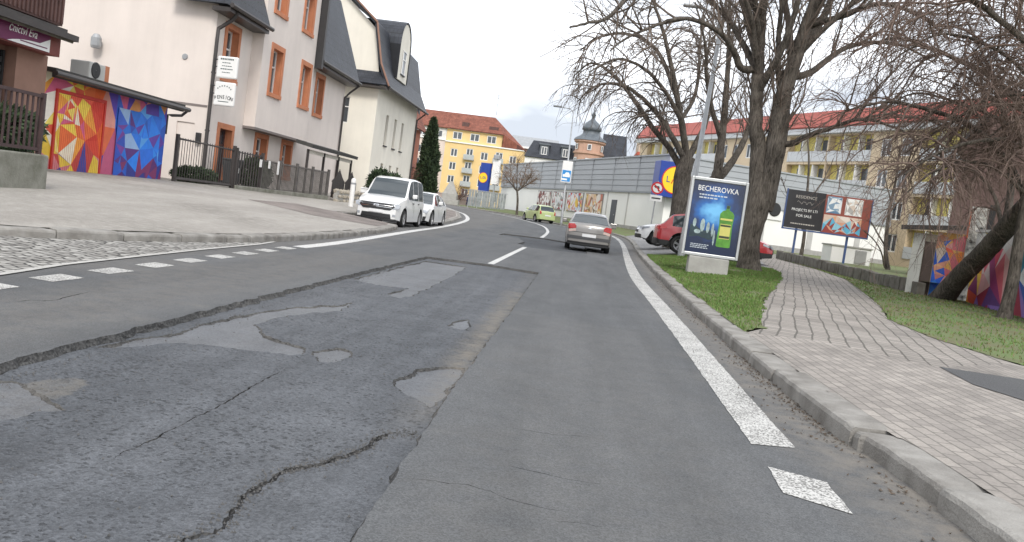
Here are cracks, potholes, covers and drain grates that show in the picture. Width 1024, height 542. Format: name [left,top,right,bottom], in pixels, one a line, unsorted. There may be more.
pothole [353,261,466,298]
pothole [447,319,471,330]
crack [420,479,599,527]
crack [174,432,414,542]
crack [115,369,285,458]
pothole [97,302,353,355]
pothole [311,348,353,362]
pothole [392,366,465,407]
